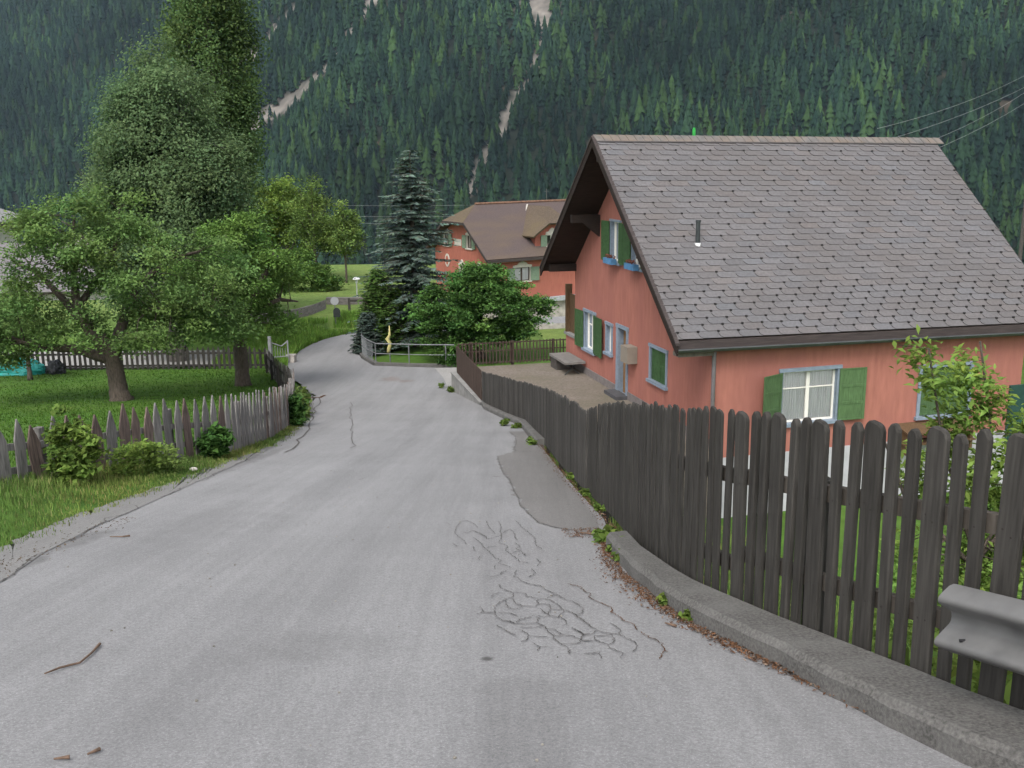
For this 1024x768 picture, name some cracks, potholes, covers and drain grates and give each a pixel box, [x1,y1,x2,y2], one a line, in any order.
crack [285,387,326,452]
crack [446,520,668,659]
